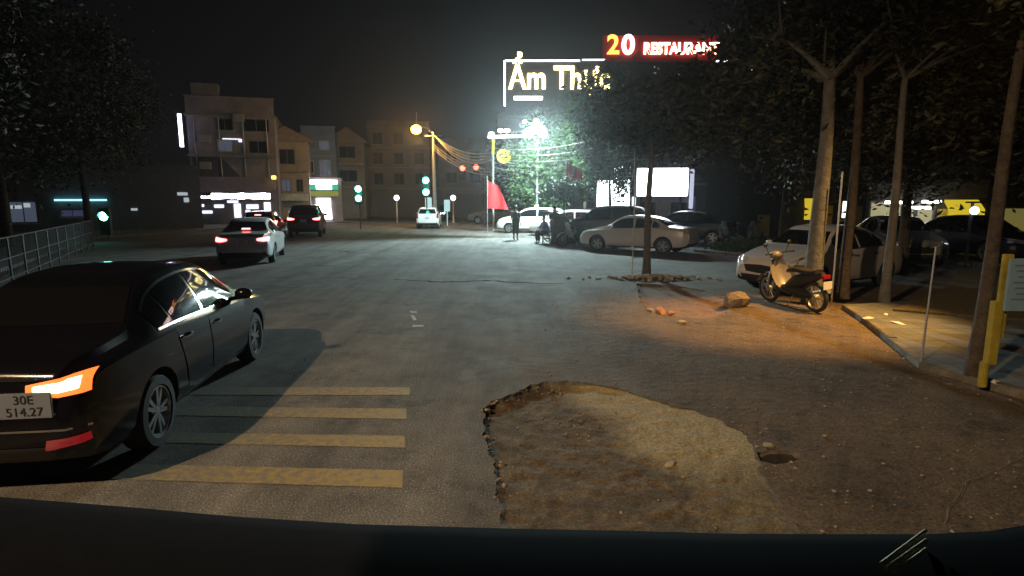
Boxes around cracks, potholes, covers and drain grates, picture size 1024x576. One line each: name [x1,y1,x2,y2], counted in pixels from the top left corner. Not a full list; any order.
crack [944,455,1024,524]
pothole [482,380,801,534]
